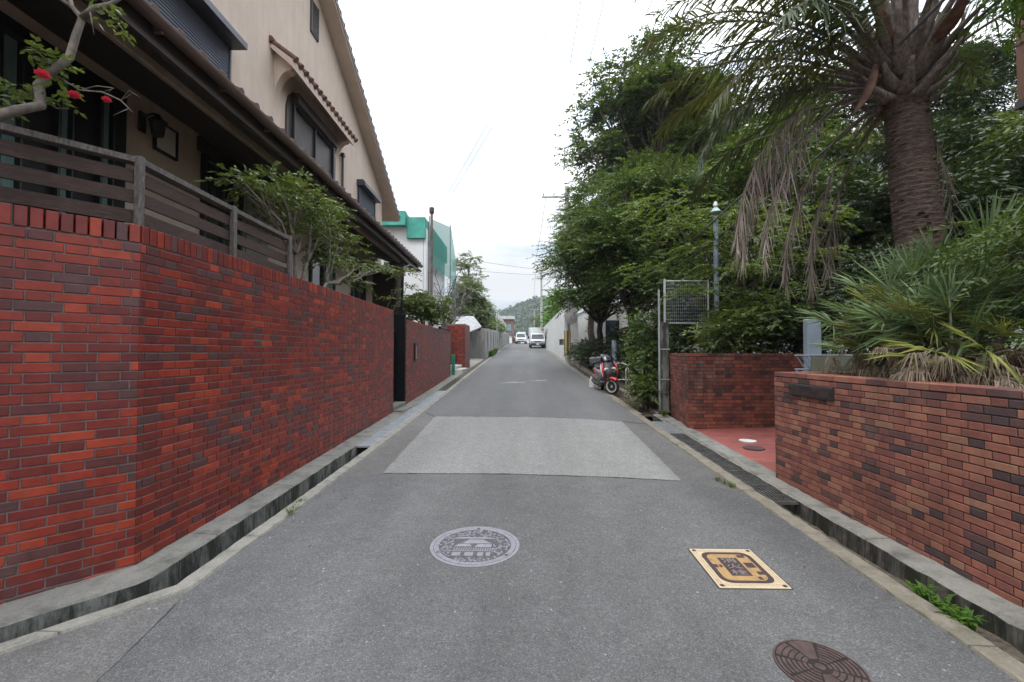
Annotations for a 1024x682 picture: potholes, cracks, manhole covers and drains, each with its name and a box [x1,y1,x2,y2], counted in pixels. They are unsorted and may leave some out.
manhole cover [430,526,520,567]
drain grate [670,433,709,449]
drain grate [694,449,744,471]
drain grate [726,470,798,505]
manhole cover [773,639,872,682]
